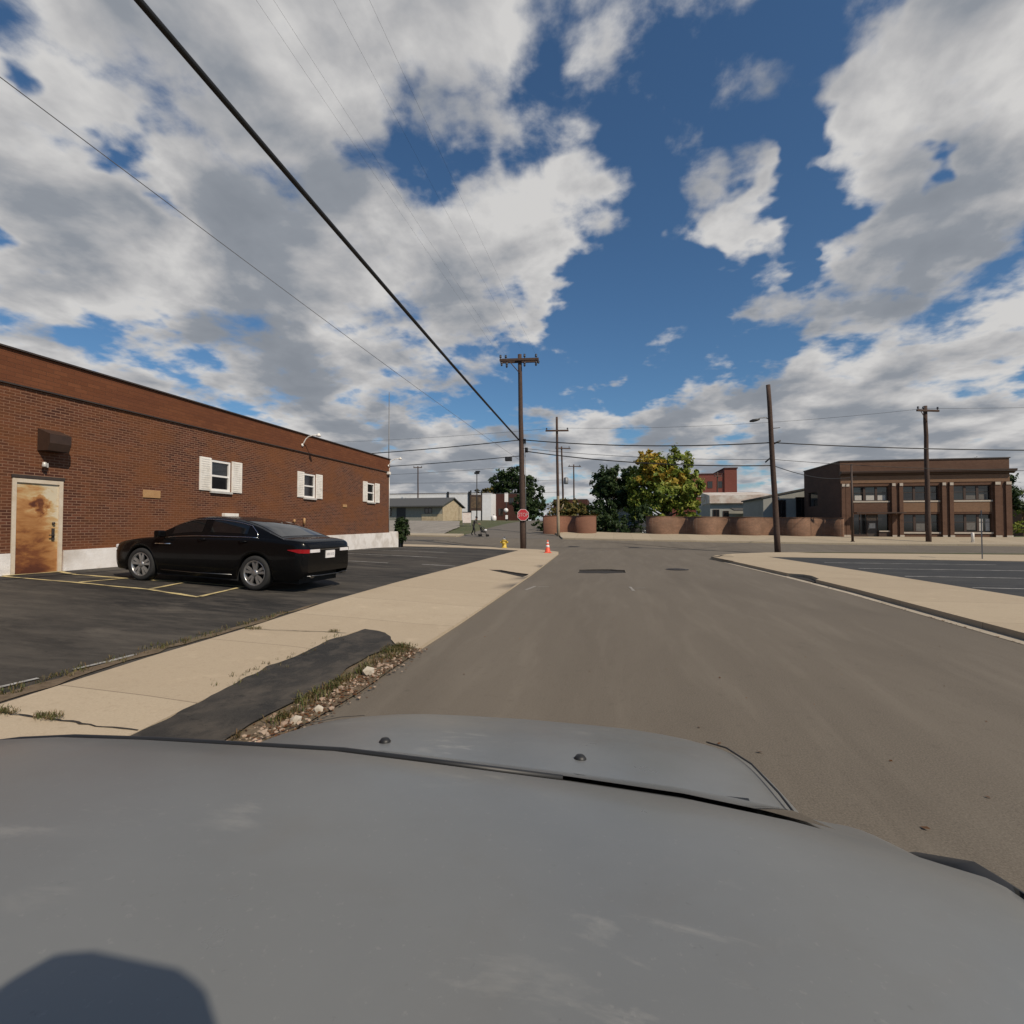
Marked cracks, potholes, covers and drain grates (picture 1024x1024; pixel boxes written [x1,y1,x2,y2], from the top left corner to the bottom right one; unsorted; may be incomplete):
crack [5,712,139,730]
